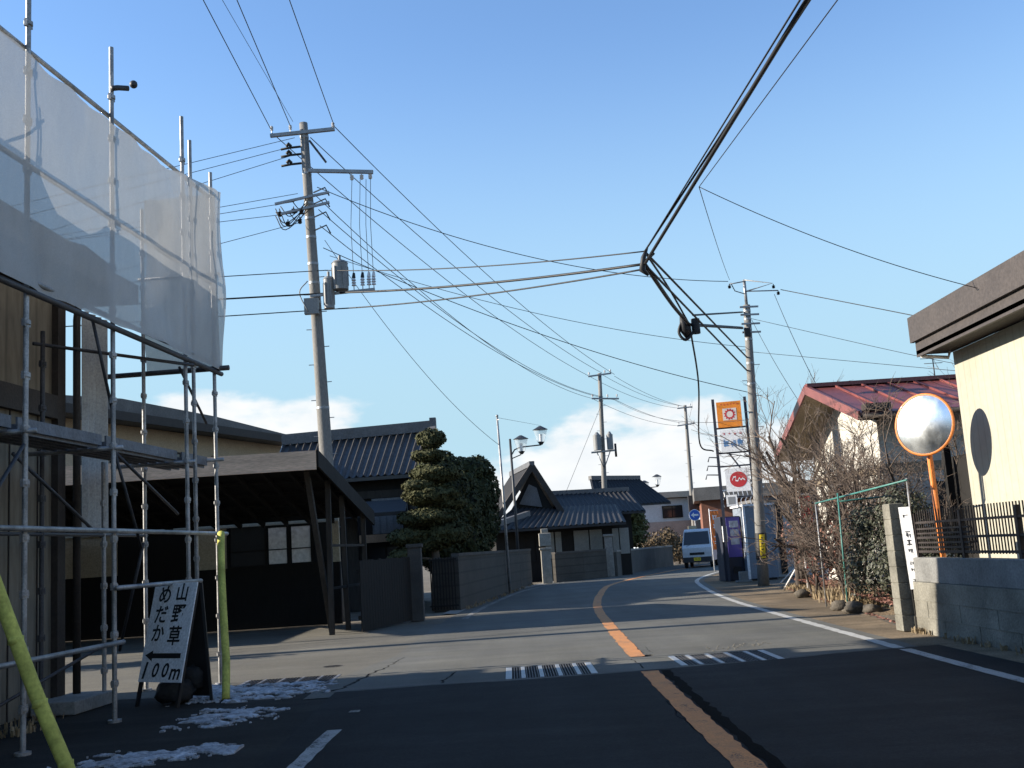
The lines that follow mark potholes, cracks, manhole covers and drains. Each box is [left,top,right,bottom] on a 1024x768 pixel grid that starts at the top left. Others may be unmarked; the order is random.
drain grate [505,662,598,679]
drain grate [240,674,342,687]
drain grate [668,650,784,666]
crack [322,658,403,693]
